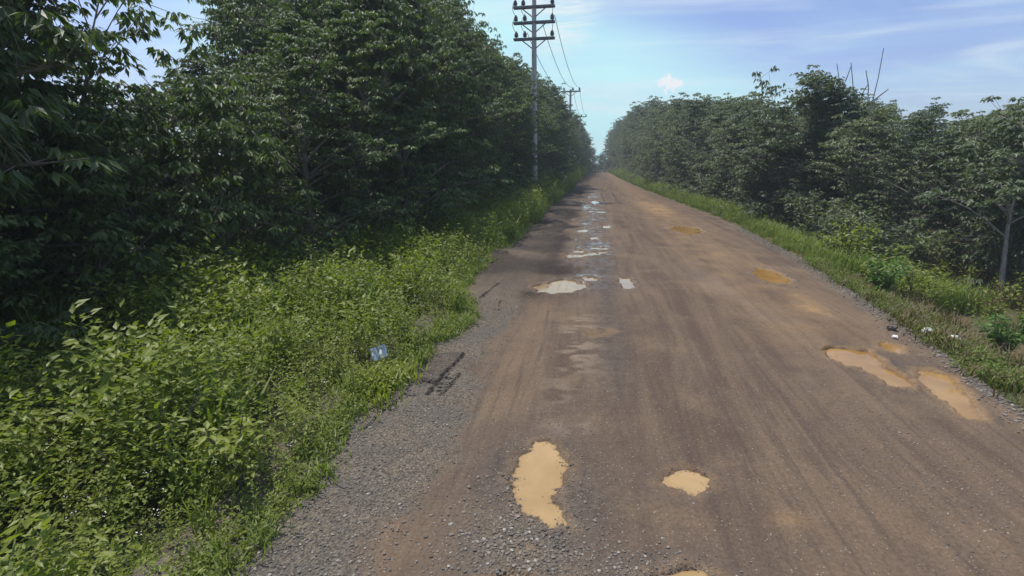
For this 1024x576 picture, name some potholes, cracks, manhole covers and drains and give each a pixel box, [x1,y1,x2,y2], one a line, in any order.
pothole [498,434,580,535]
pothole [610,275,643,290]
pothole [747,267,798,287]
pothole [817,344,921,392]
pothole [870,340,911,355]
pothole [650,460,725,501]
pothole [904,366,995,423]
pothole [525,277,592,295]
pothole [560,250,613,258]
pothole [664,225,708,235]
